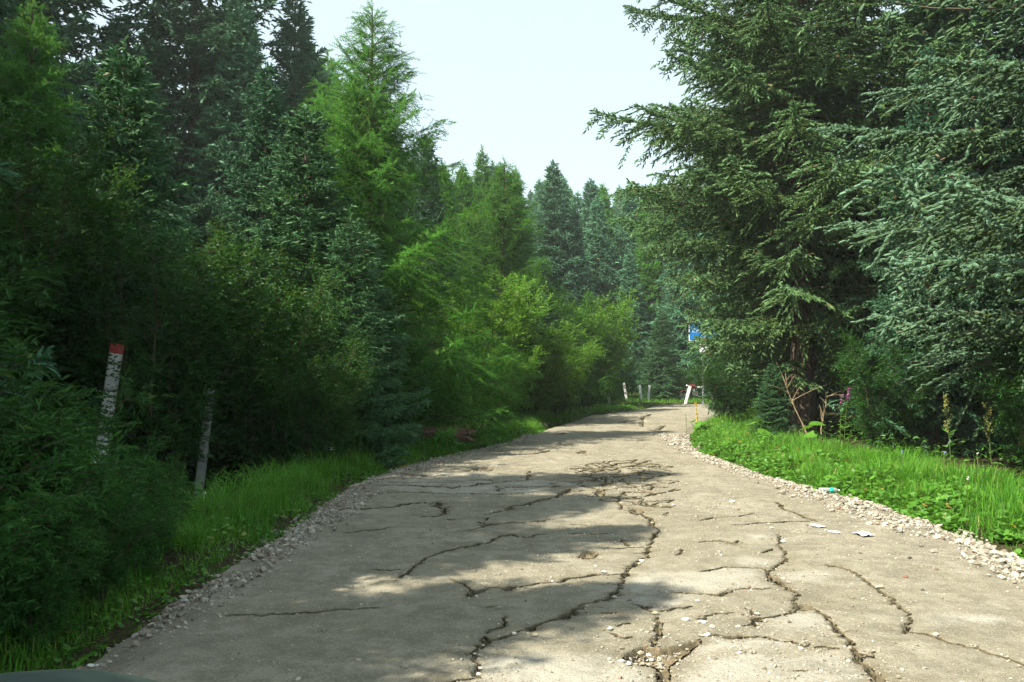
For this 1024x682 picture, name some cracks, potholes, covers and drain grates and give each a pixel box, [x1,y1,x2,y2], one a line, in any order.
crack [225,607,380,617]
crack [345,459,1024,682]
pothole [624,640,701,682]
